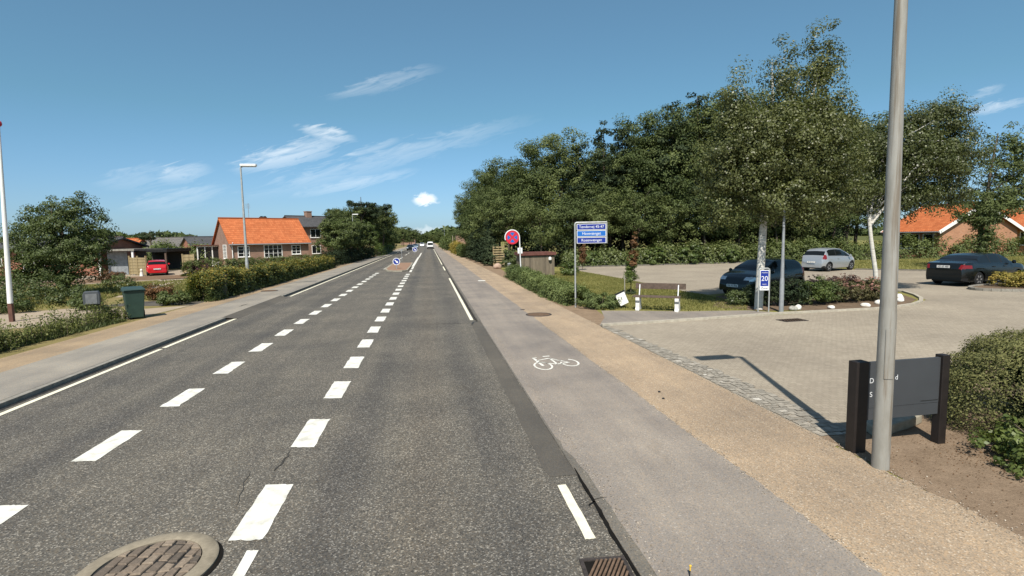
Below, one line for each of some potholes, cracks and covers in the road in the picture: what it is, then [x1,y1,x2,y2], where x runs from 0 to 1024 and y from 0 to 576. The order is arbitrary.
manhole cover [76,532,223,576]
